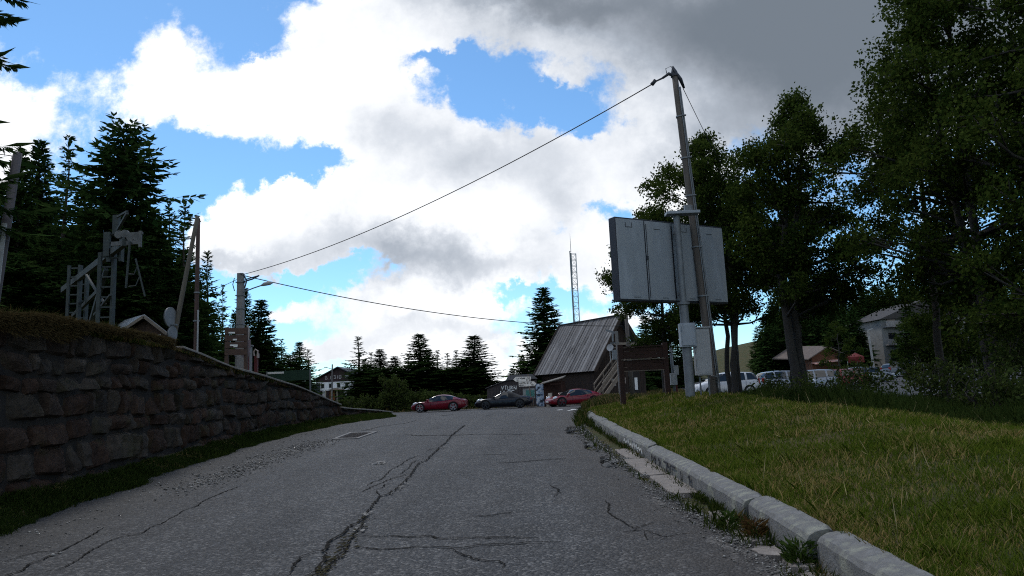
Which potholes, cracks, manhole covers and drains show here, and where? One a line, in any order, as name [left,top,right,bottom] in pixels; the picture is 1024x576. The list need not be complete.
manhole cover [332,431,378,440]
crack [5,486,240,576]
crack [605,501,687,540]
crack [288,414,548,576]
